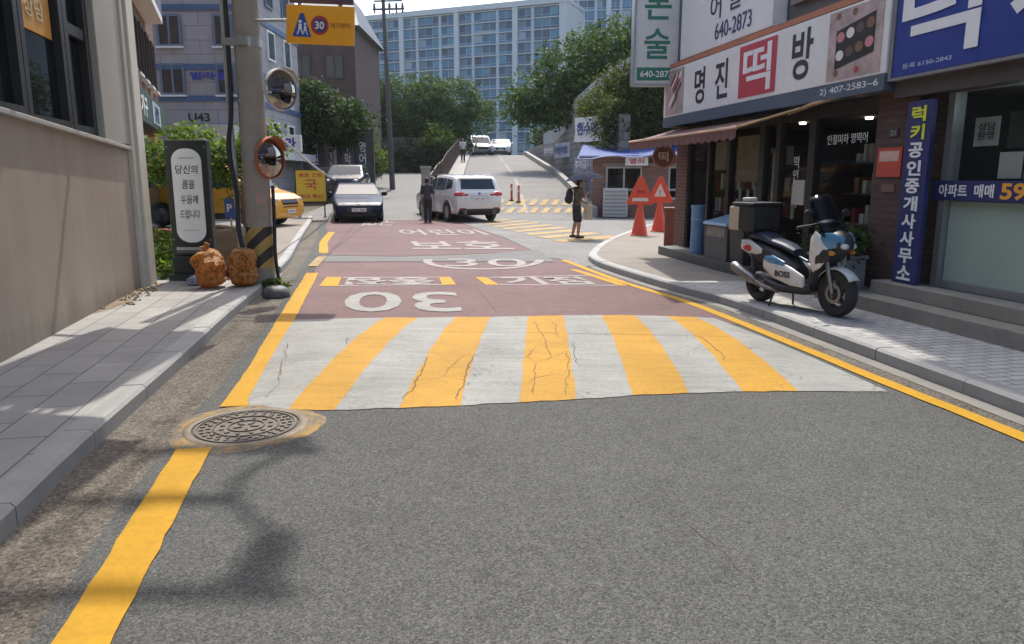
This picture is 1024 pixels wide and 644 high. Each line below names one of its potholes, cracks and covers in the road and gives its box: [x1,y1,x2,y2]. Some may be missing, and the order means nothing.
crack [403,353,475,399]
manhole cover [169,405,326,454]
crack [526,322,580,395]
